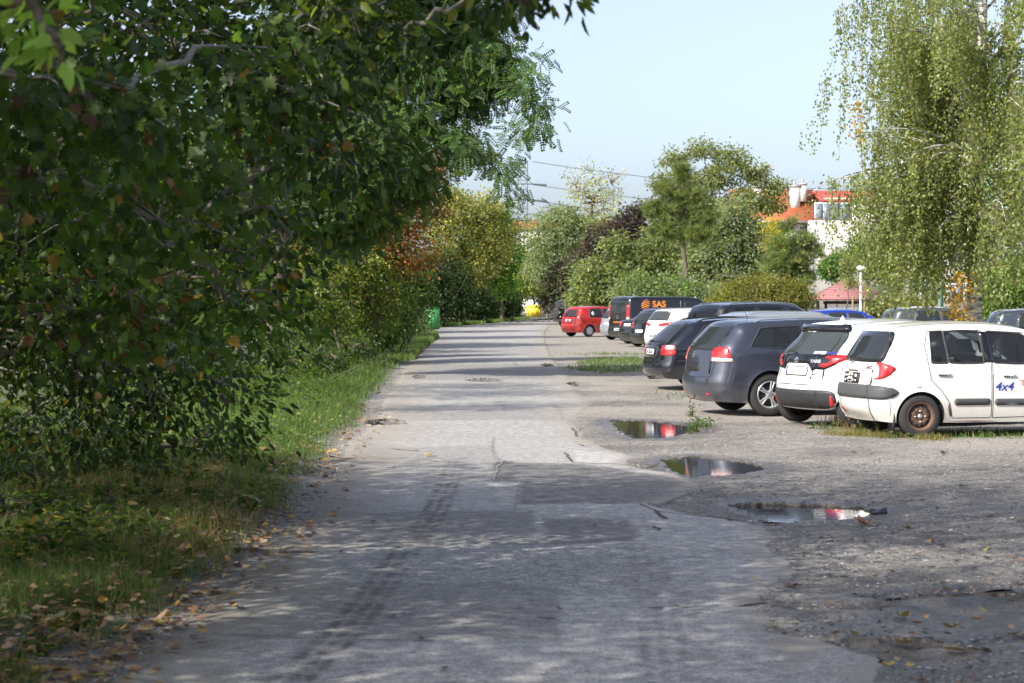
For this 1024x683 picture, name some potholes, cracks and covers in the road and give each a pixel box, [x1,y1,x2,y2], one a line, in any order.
pothole [660,456,767,477]
crack [554,404,657,467]
crack [638,502,746,531]
pothole [728,501,871,523]
pothole [609,419,705,439]
pothole [365,418,408,426]
